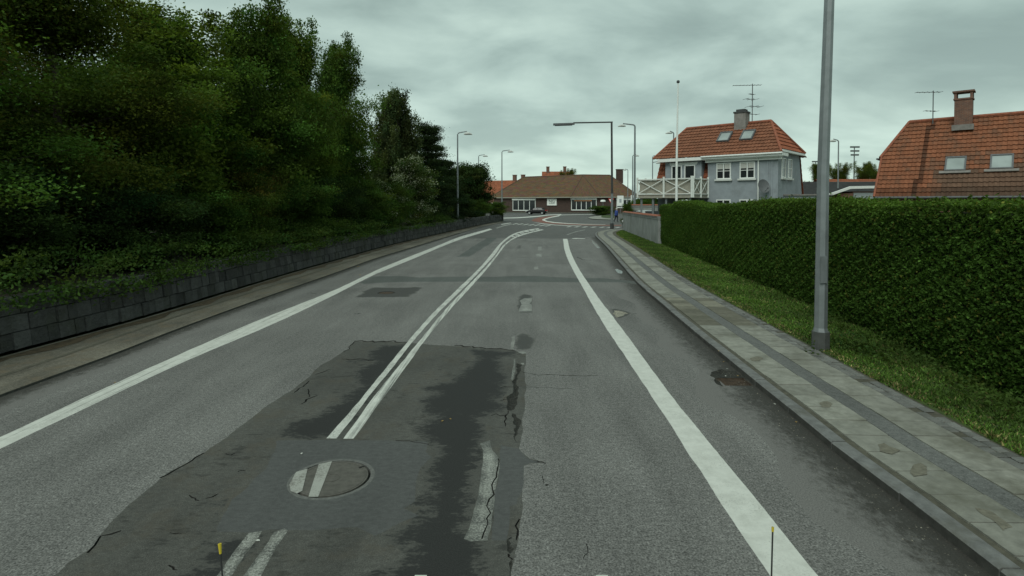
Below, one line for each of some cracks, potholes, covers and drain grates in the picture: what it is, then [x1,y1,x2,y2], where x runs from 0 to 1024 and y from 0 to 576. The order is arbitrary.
crack [160,453,204,478]
crack [87,530,121,553]
crack [481,459,520,560]
pothole [710,369,746,386]
manhole cover [287,459,375,500]
crack [294,359,373,404]
